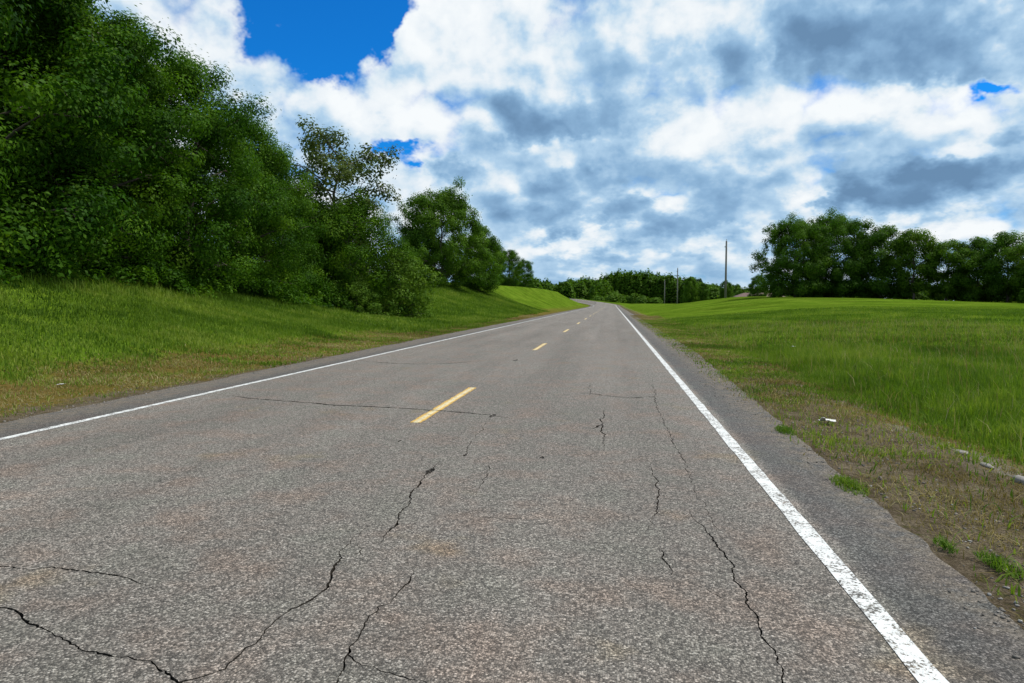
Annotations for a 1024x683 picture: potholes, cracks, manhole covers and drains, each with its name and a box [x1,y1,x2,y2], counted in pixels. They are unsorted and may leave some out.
crack [237,396,512,540]
crack [588,380,784,683]
crack [0,530,426,683]
